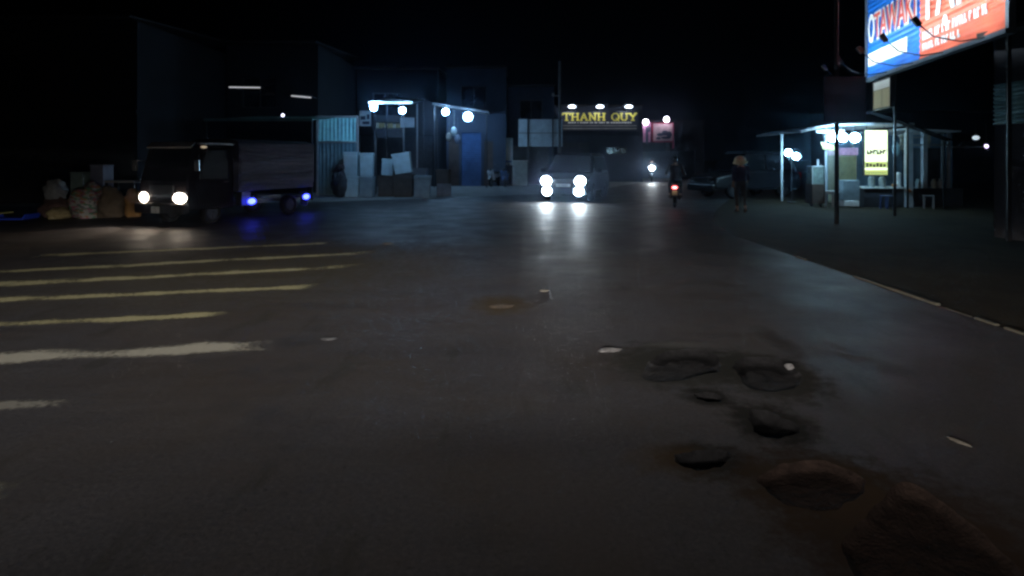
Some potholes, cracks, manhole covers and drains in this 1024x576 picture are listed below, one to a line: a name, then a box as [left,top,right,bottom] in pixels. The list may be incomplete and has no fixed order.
pothole [756,460,866,511]
pothole [642,349,721,382]
pothole [841,482,1024,576]
pothole [732,357,802,392]
pothole [694,392,724,402]
pothole [674,449,731,471]
pothole [748,409,800,439]
